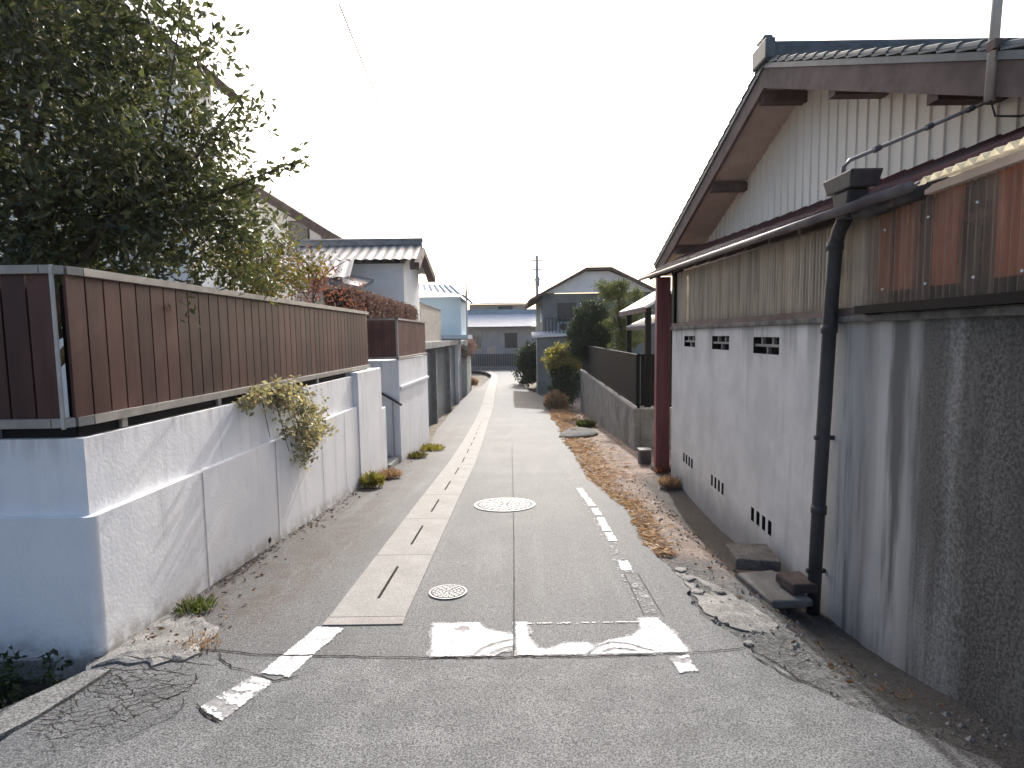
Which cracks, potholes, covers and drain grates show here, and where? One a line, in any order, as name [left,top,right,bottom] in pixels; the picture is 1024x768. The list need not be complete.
crack [30,643,835,743]
manhole cover [429,584,467,600]
manhole cover [474,498,535,512]
